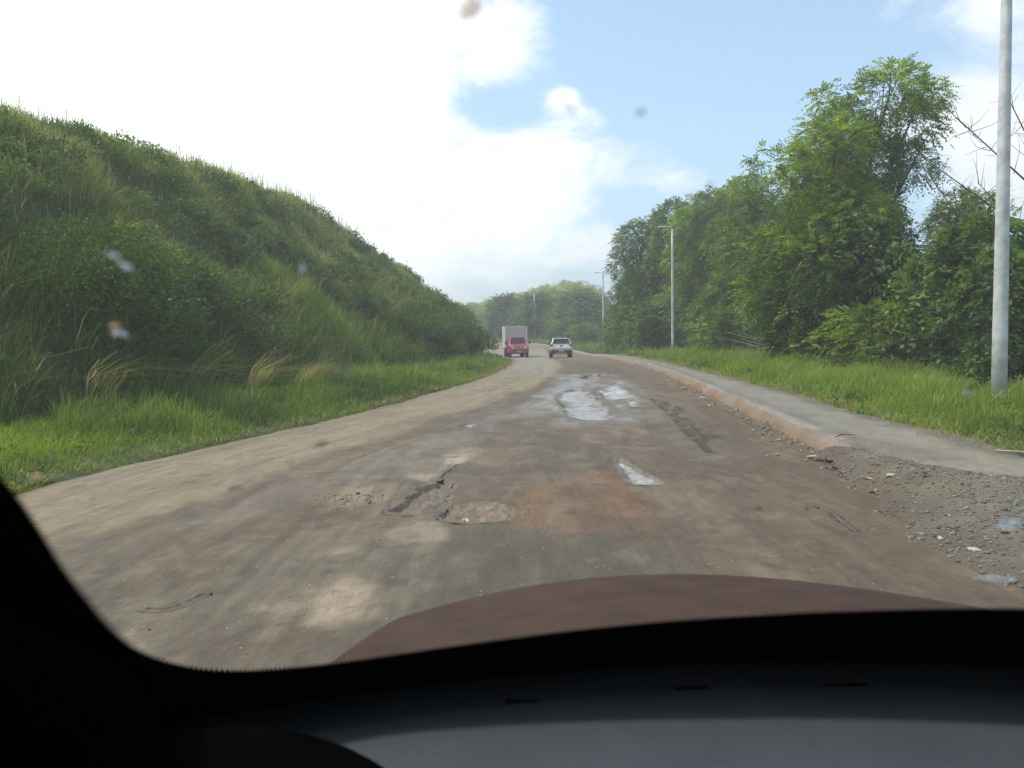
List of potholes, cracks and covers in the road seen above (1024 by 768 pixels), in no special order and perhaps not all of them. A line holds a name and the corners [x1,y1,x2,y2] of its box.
pothole [609,456,669,486]
crack [433,464,462,482]
crack [135,591,212,613]
crack [785,494,871,532]
pothole [552,389,618,421]
